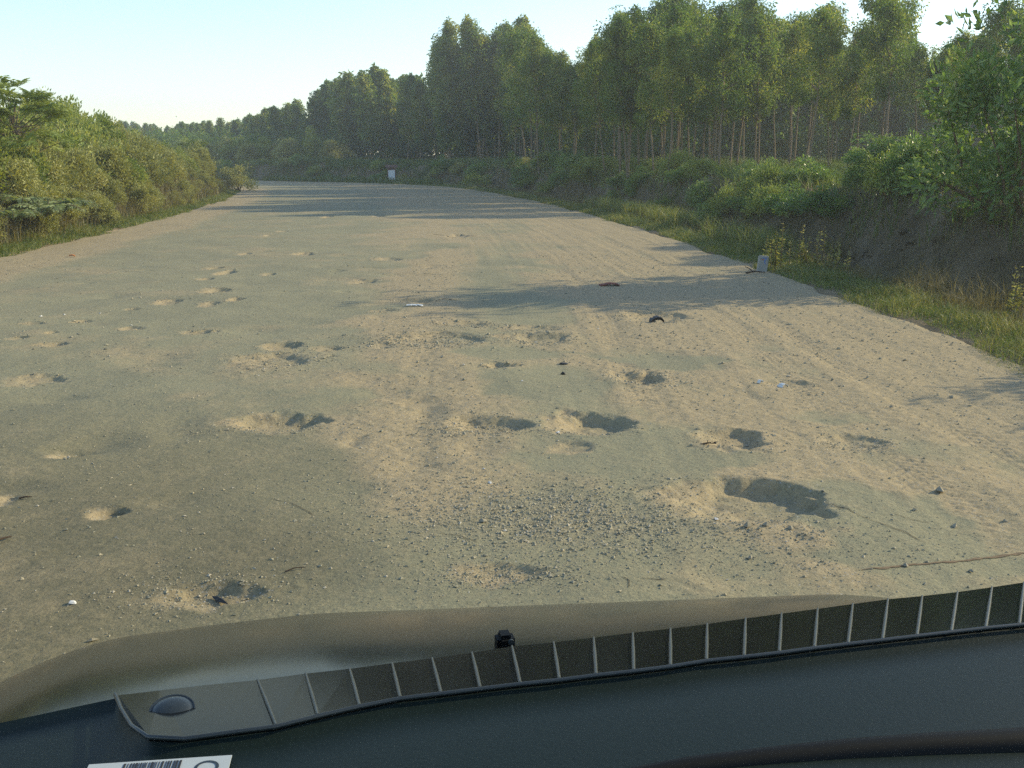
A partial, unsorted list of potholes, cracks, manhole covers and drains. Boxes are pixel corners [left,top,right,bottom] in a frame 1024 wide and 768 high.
pothole [809,432,896,454]
pothole [221,350,335,371]
pothole [0,373,72,387]
pothole [447,414,539,435]
pothole [690,428,769,454]
pothole [209,412,333,436]
pothole [602,370,664,387]
pothole [136,580,268,614]
pothole [634,475,844,525]
pothole [85,506,128,521]
pothole [256,340,310,354]
pothole [532,409,651,436]
